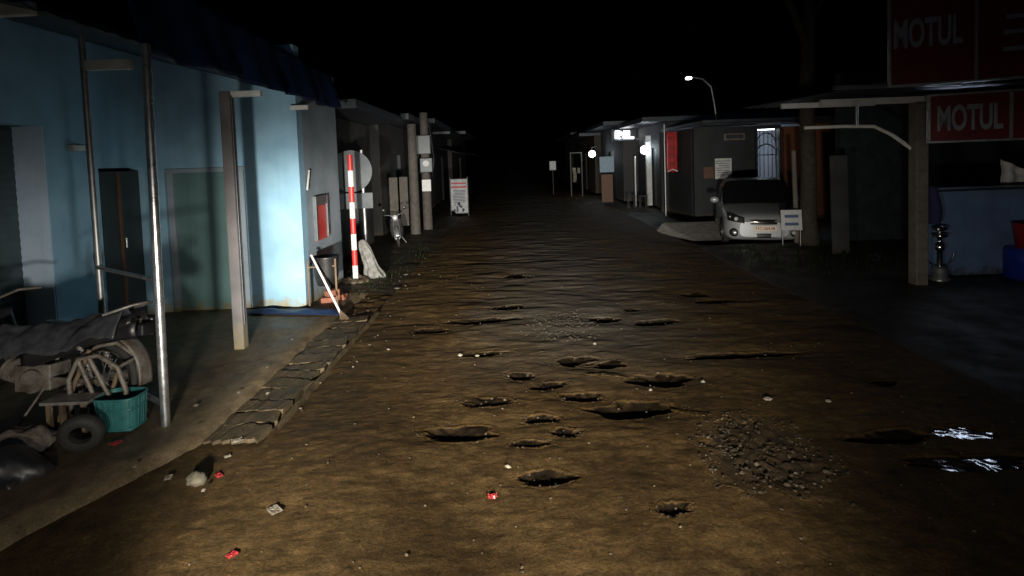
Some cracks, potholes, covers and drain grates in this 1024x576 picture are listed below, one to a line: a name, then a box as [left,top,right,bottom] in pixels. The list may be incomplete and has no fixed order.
pothole [545,425,586,440]
pothole [888,453,1024,474]
pothole [677,350,815,361]
pothole [570,398,689,422]
pothole [448,350,515,359]
pothole [834,425,938,446]
pothole [556,390,607,404]
pothole [552,355,607,368]
pothole [438,316,526,326]
pothole [455,396,520,408]
pothole [524,380,574,392]
pothole [617,370,698,390]
